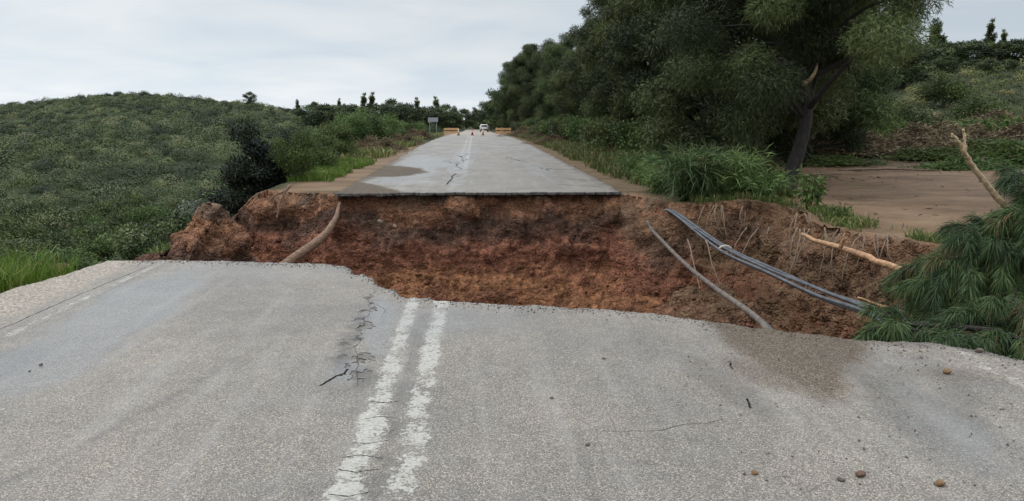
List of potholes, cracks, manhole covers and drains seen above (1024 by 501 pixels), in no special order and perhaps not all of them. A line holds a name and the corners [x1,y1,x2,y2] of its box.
crack [657,419,722,431]
crack [319,290,399,419]
